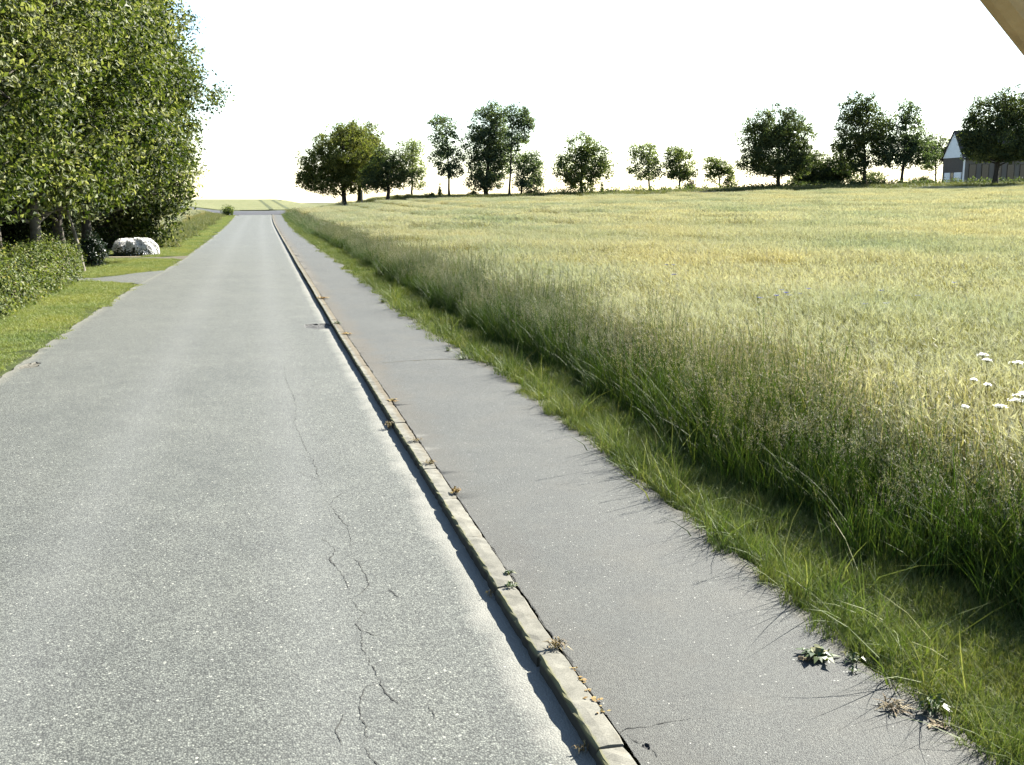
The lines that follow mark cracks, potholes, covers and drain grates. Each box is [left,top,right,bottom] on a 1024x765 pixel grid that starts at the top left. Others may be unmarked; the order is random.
crack [284,366,400,765]
